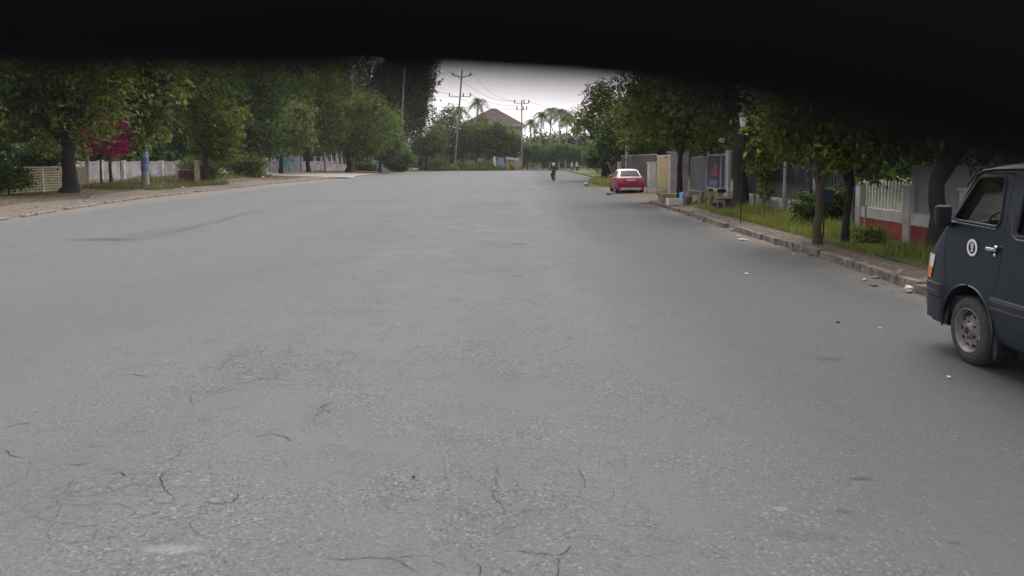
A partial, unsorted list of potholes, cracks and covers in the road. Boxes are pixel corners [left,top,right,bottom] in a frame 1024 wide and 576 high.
crack [1,446,288,543]
crack [207,343,384,392]
crack [350,440,730,575]
crack [331,555,445,574]
